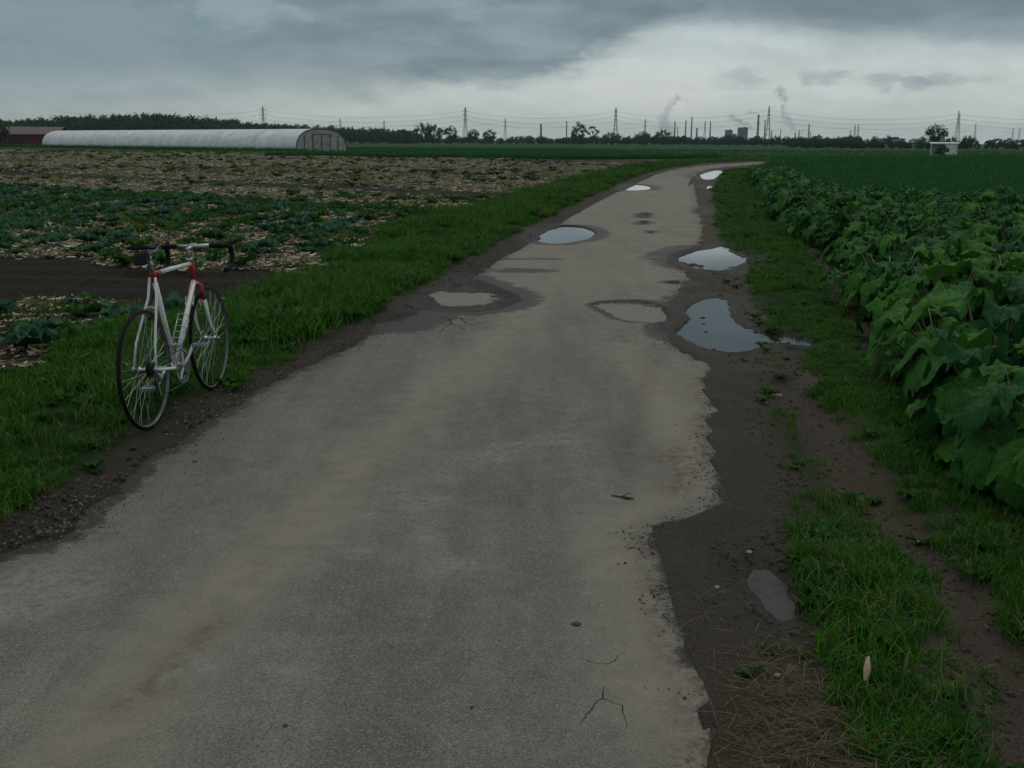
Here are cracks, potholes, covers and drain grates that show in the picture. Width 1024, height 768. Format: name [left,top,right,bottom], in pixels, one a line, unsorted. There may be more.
crack [579,688,627,728]
pothole [590,300,667,322]
pothole [406,277,522,313]
